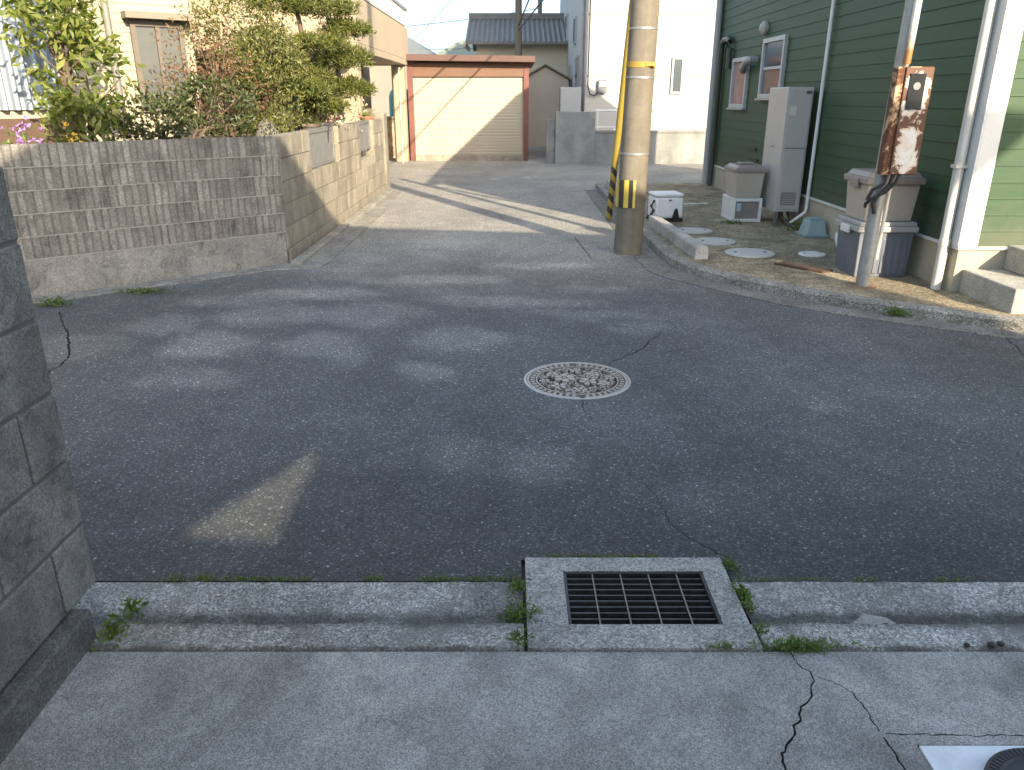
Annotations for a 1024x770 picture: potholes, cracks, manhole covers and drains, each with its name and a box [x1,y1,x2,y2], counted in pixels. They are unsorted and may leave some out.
manhole cover [524,362,631,402]
crack [780,653,906,770]
crack [608,329,692,364]
crack [626,470,729,558]
drain grate [525,558,763,652]
crack [49,313,71,375]
